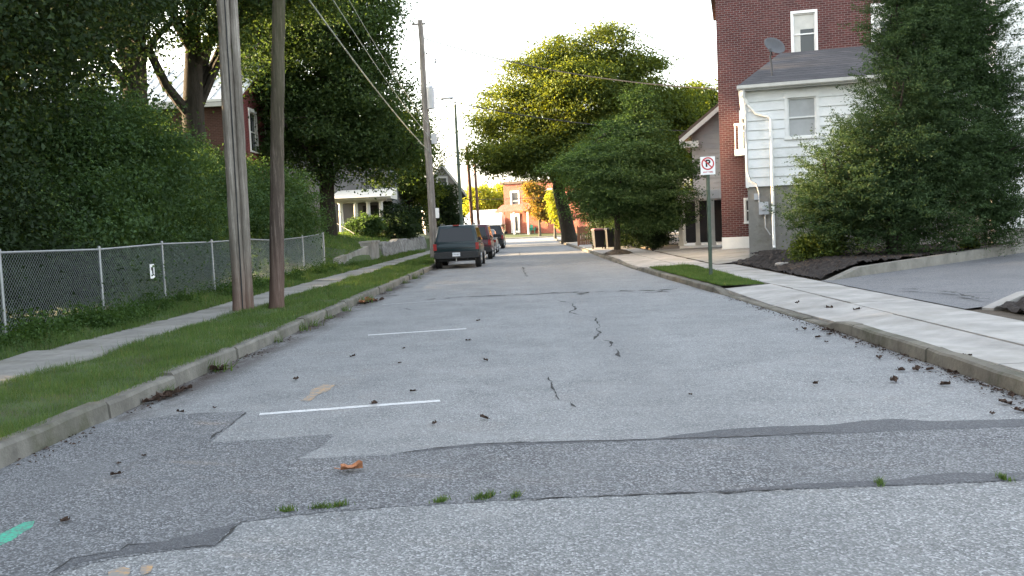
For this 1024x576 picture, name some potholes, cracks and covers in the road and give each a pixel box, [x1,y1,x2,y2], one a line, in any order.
crack [391,253,677,357]
